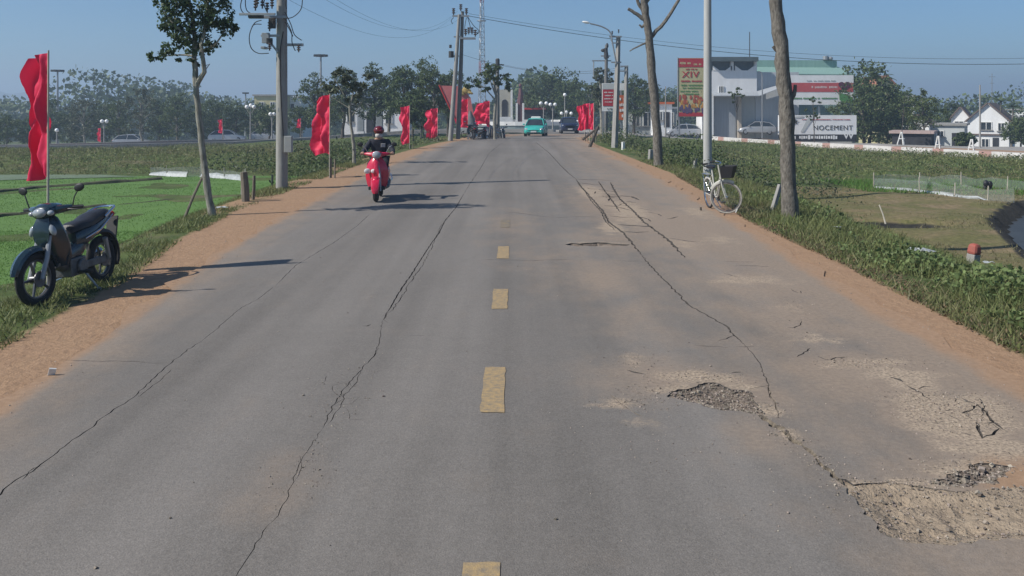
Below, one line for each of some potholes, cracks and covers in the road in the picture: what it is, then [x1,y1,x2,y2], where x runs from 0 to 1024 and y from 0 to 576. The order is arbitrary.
crack [236,138,510,576]
crack [797,348,1018,455]
crack [486,143,843,484]
pothole [927,461,1015,488]
pothole [667,382,767,418]
crack [0,221,362,495]
pothole [836,478,1024,545]
